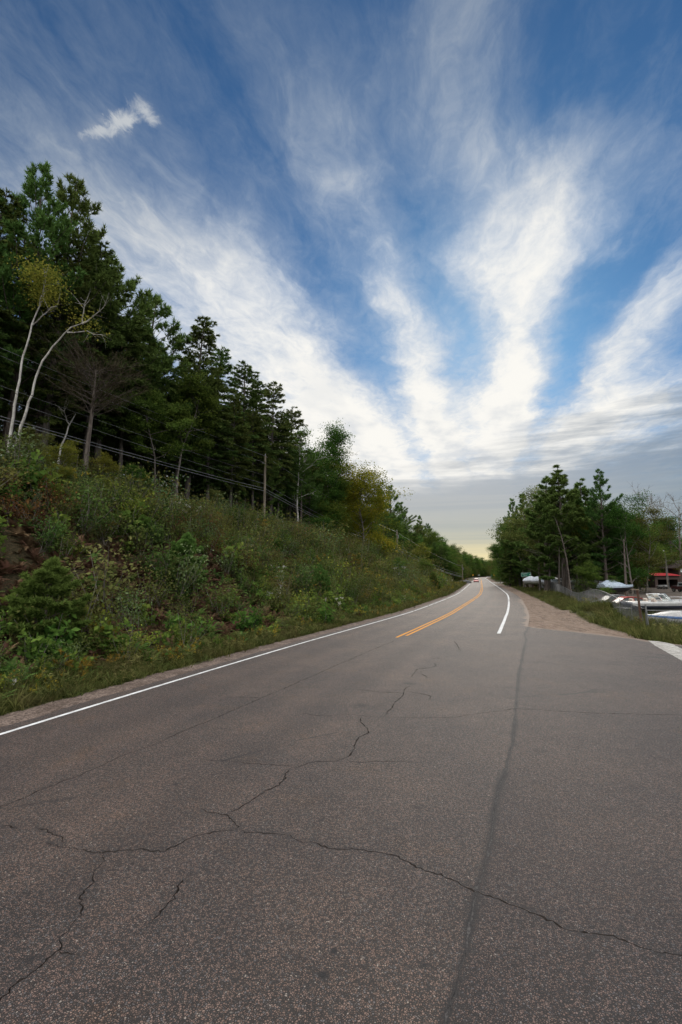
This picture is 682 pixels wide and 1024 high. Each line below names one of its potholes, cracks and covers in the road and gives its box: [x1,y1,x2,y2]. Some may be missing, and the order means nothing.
crack [0,717,682,1001]
crack [0,641,393,807]
